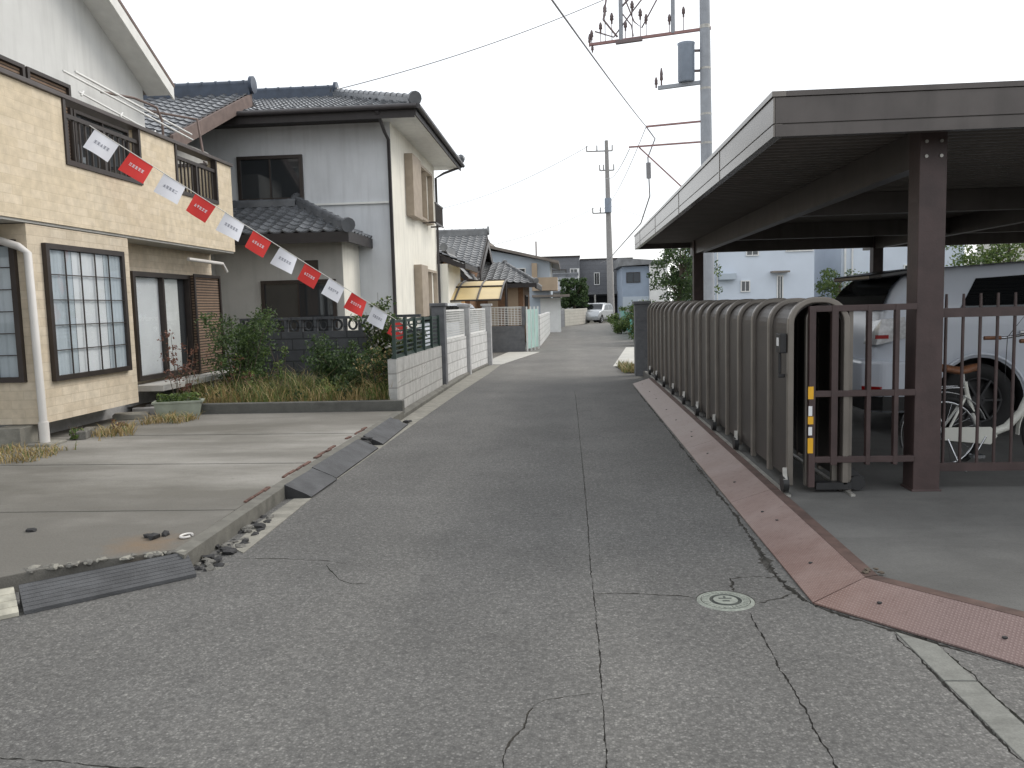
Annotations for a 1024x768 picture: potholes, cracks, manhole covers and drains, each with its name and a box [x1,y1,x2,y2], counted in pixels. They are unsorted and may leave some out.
crack [502,395,692,768]
crack [635,388,1023,768]
crack [240,558,362,584]
crack [0,758,145,768]
manhole cover [697,591,755,611]
